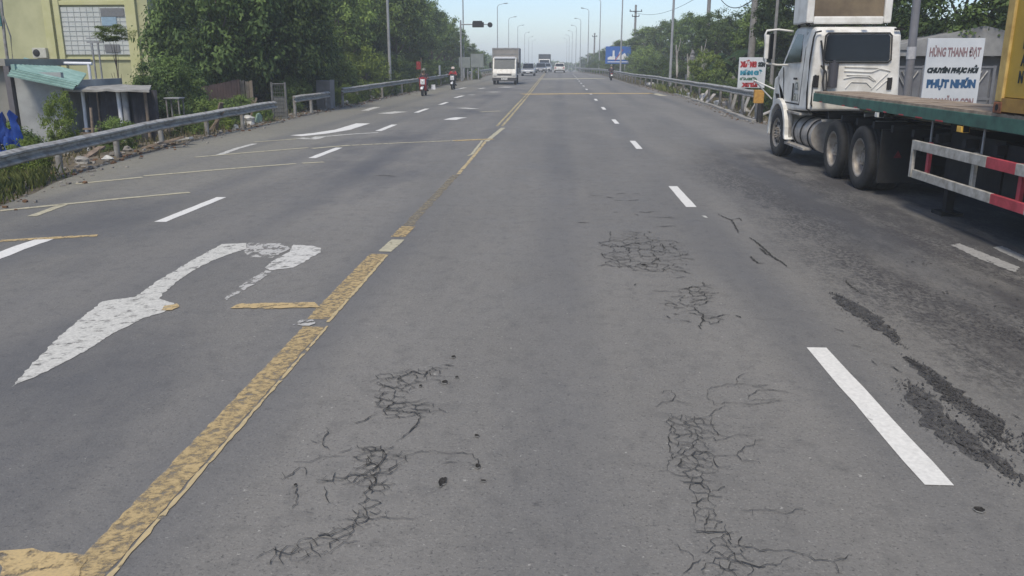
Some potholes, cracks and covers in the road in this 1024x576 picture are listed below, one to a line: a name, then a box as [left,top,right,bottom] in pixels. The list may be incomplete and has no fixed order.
crack [257,364,453,564]
crack [718,213,787,266]
crack [583,193,741,329]
crack [657,373,848,576]
